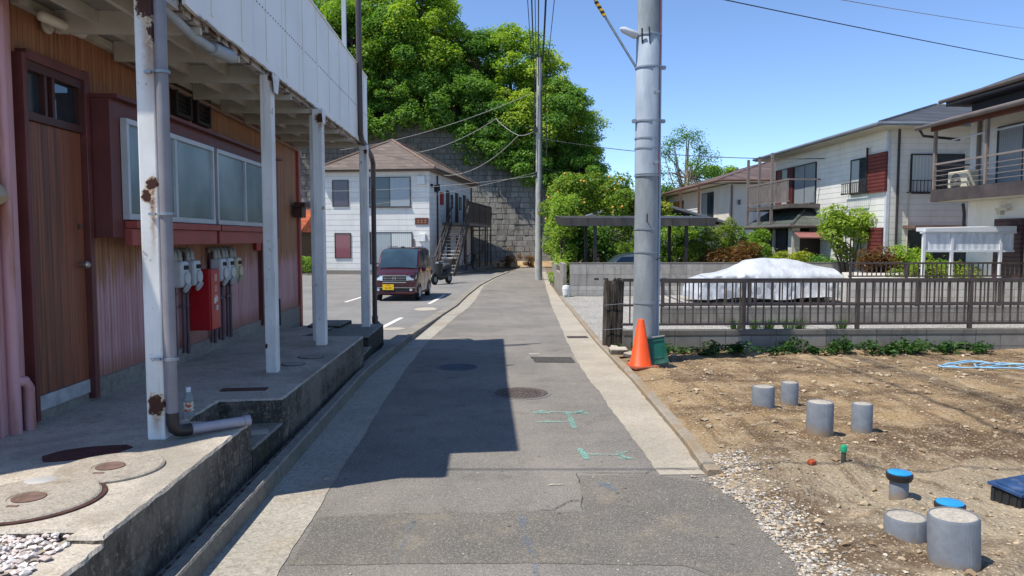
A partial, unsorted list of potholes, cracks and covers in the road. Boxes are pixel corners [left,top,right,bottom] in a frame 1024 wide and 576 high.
manhole cover [52,452,165,484]
manhole cover [0,478,108,527]
manhole cover [491,387,551,400]
